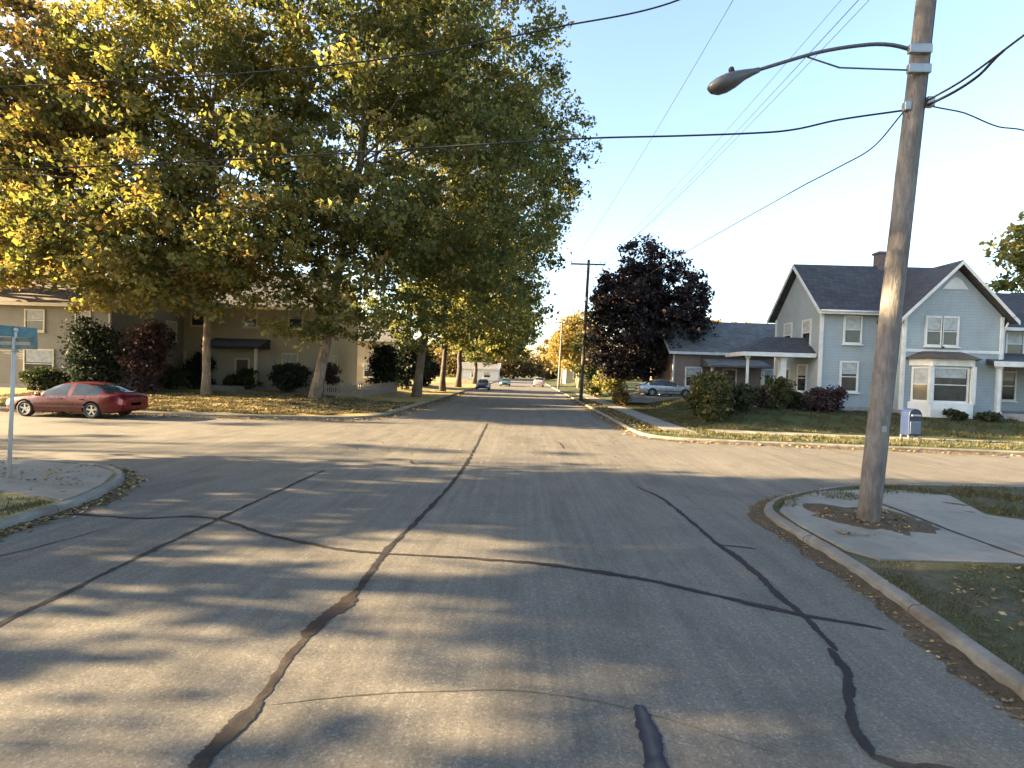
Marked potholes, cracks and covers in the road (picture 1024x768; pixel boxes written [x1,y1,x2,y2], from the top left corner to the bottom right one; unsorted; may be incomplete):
crack [270,689,779,754]
crack [323,450,502,468]
